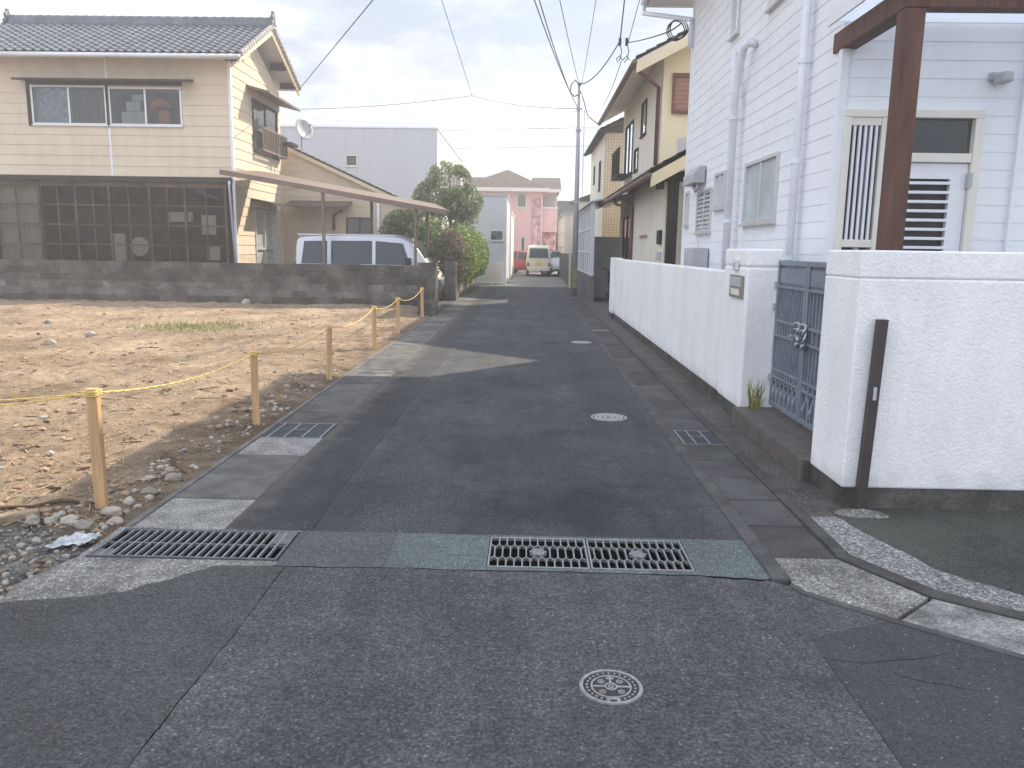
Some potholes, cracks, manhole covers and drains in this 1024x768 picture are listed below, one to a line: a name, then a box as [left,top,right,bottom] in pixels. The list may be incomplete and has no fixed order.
manhole cover [579,669,643,705]
drain grate [487,537,590,569]
drain grate [586,539,695,571]
crack [812,642,966,767]
manhole cover [591,413,627,421]
drain grate [87,528,298,561]
